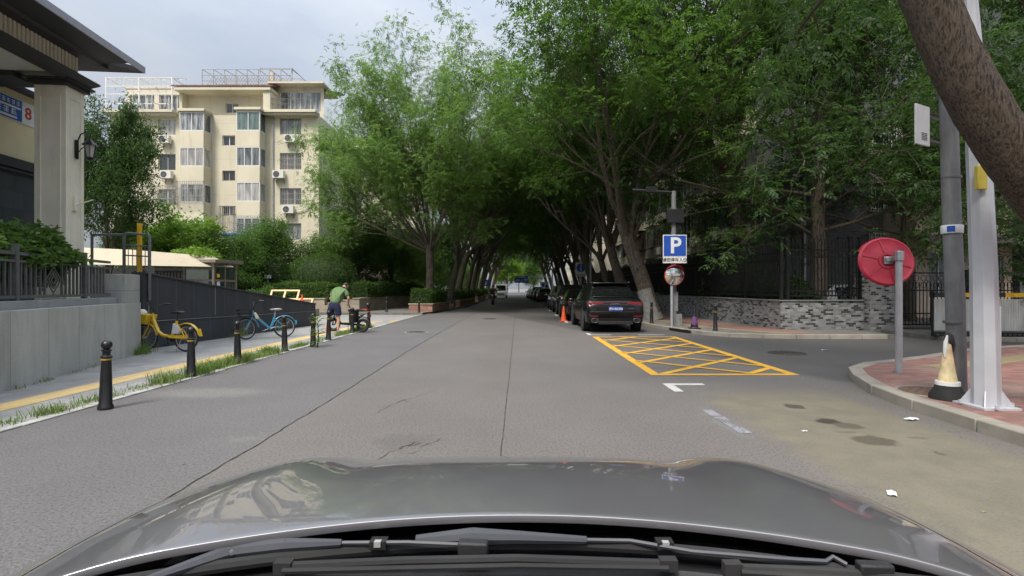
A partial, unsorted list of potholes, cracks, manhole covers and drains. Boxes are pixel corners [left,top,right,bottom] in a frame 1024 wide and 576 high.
manhole cover [894,385,932,397]
crack [165,308,484,499]
